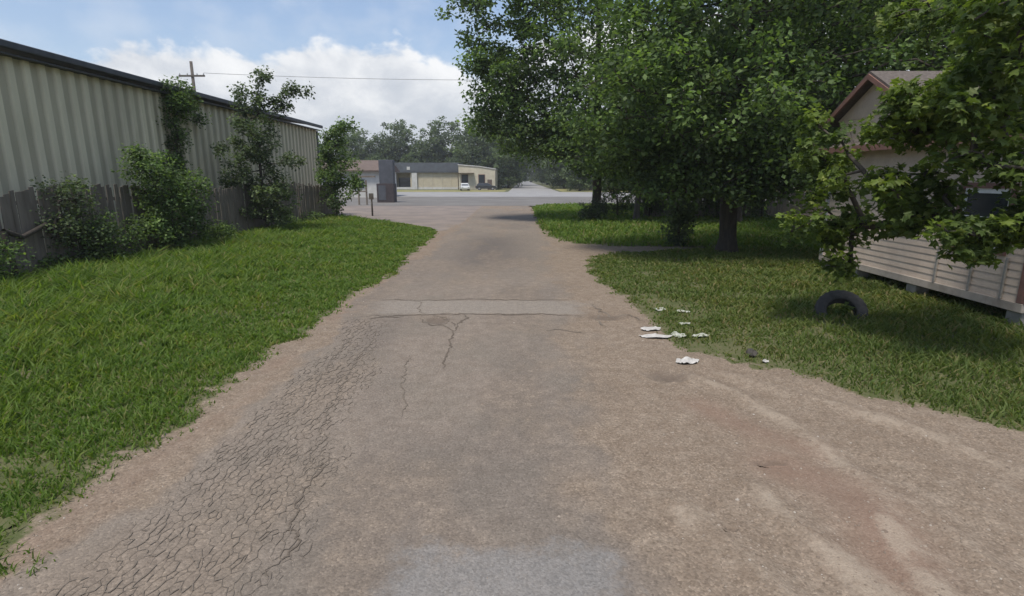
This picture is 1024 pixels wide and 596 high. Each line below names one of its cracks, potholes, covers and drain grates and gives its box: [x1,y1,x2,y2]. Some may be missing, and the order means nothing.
crack [45,298,643,596]
